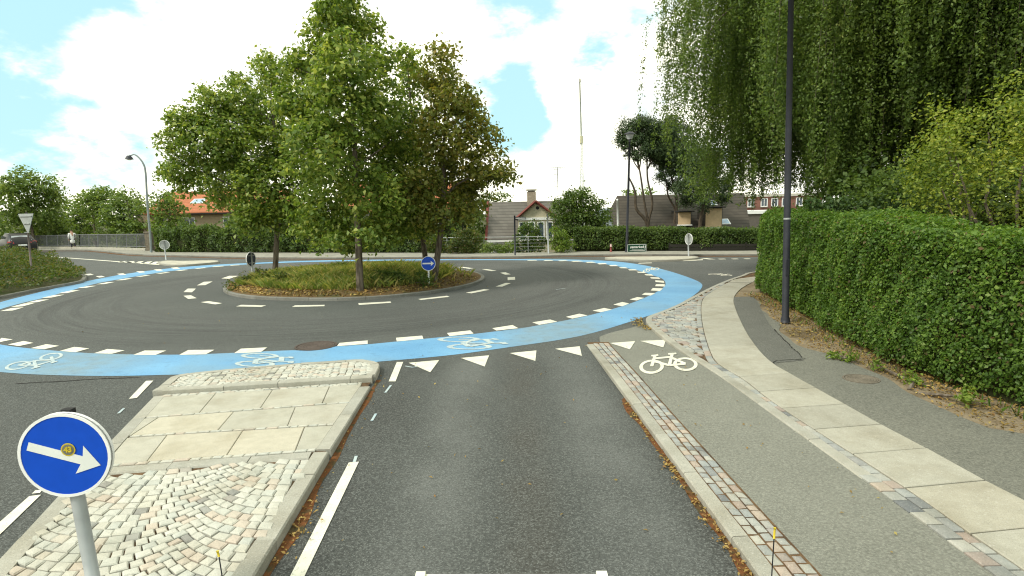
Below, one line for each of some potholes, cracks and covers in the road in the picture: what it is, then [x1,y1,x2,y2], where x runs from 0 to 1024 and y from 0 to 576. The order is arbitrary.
manhole cover [842,374,881,384]
manhole cover [294,341,337,351]
